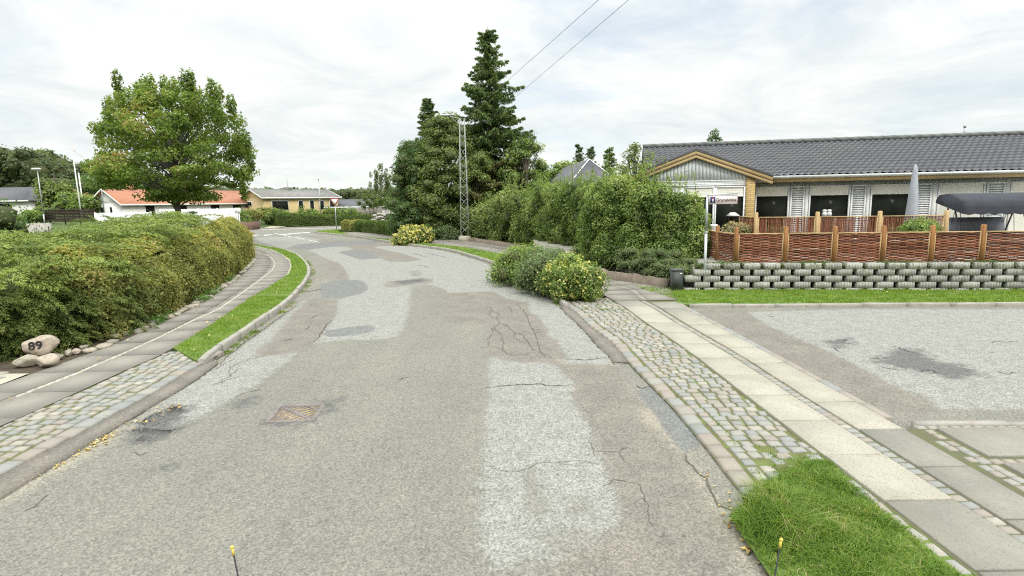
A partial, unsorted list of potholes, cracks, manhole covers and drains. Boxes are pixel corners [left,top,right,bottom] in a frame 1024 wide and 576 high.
pothole [137,405,188,428]
crack [485,440,650,517]
pothole [126,426,183,444]
crack [487,304,546,355]
